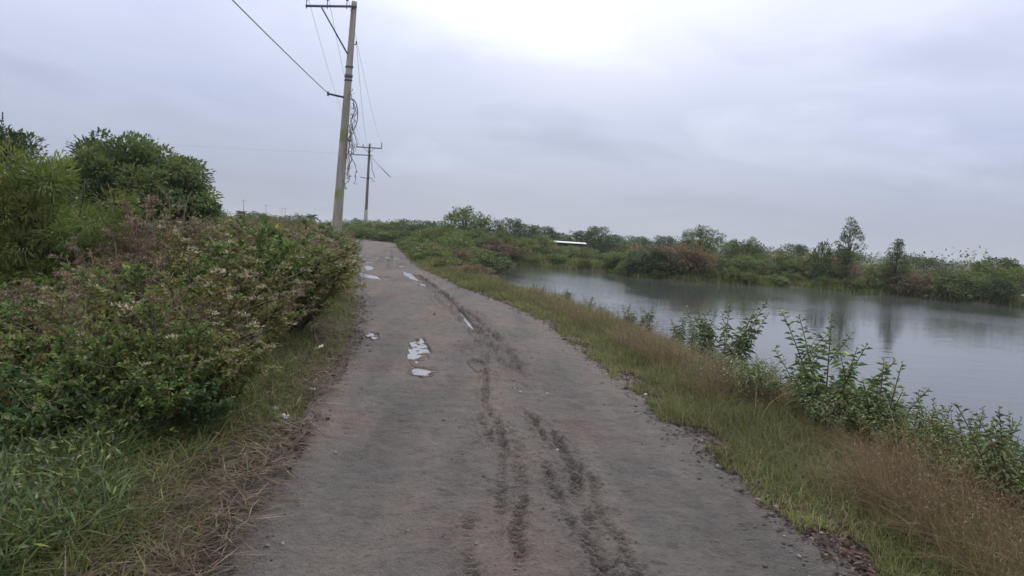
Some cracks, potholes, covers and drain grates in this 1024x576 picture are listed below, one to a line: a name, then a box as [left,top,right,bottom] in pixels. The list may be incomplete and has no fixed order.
pothole [406,337,433,366]
pothole [406,366,440,379]
